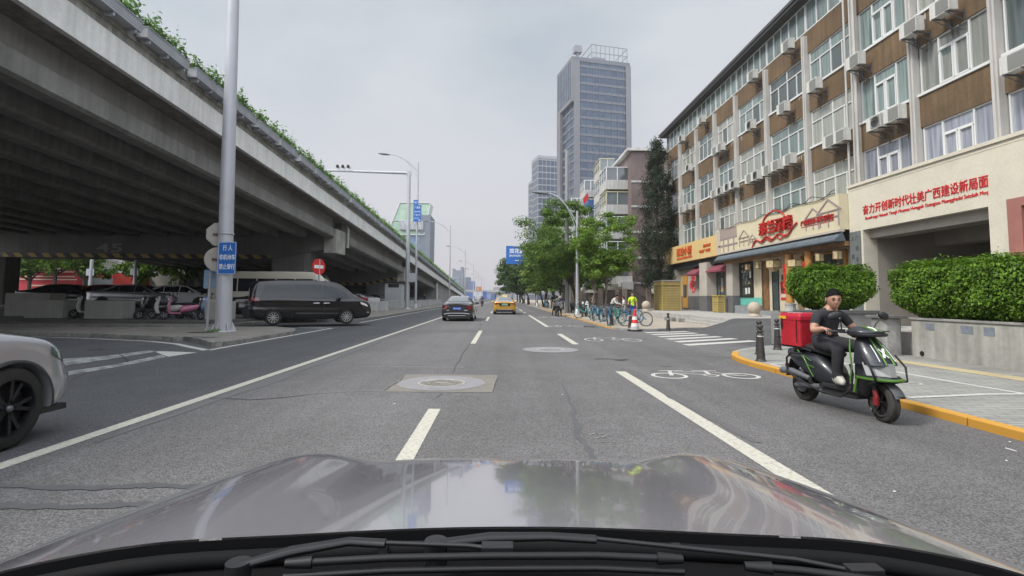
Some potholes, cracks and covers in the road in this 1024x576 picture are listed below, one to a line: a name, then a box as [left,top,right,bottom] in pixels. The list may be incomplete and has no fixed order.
manhole cover [397,376,485,391]
